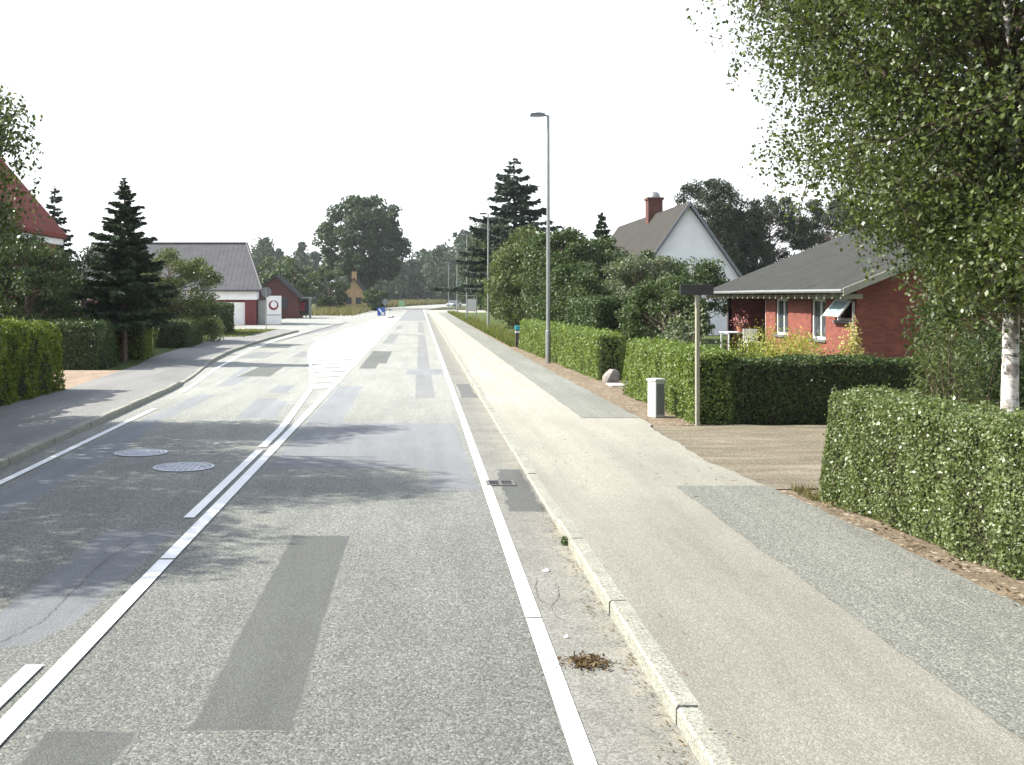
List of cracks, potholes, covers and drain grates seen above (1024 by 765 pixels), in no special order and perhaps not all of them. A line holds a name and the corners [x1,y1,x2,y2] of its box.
crack [1,541,133,641]
manhole cover [153,462,215,471]
